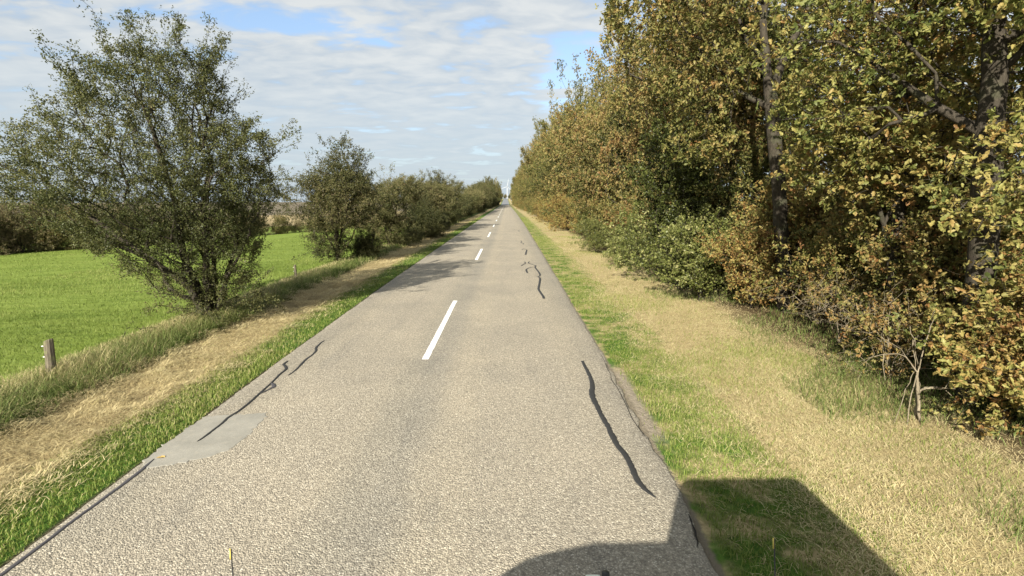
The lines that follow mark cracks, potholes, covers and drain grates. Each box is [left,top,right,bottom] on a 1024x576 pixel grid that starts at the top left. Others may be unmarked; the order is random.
crack [601,355,646,437]
